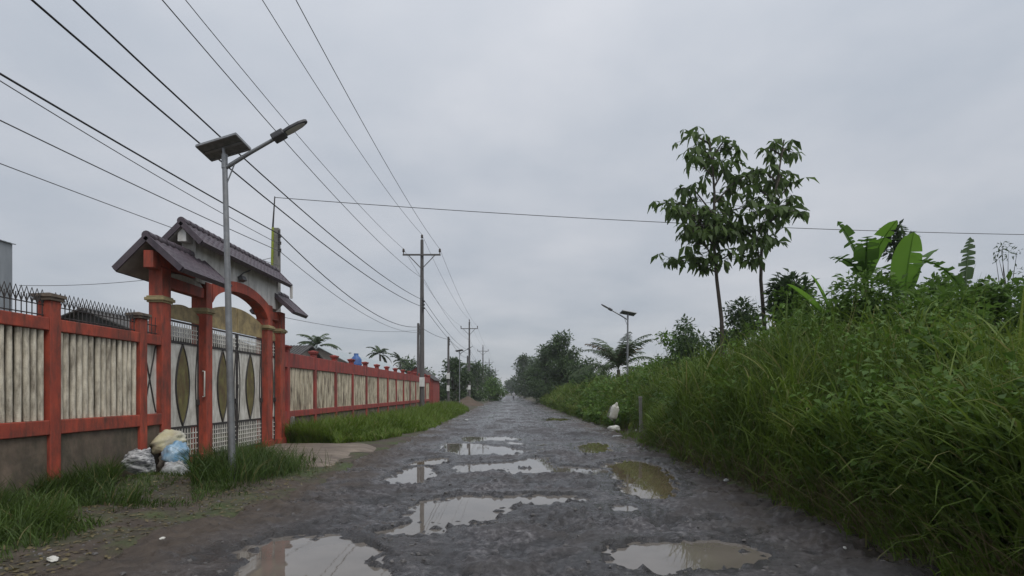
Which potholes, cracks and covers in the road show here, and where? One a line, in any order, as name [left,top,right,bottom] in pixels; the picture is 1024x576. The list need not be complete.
pothole [567,439,623,454]
pothole [598,502,647,513]
pothole [443,454,611,475]
pothole [584,533,788,576]
pothole [590,456,696,500]
pothole [368,488,602,539]
pothole [432,441,556,456]
pothole [212,526,412,576]
pothole [375,465,448,485]
